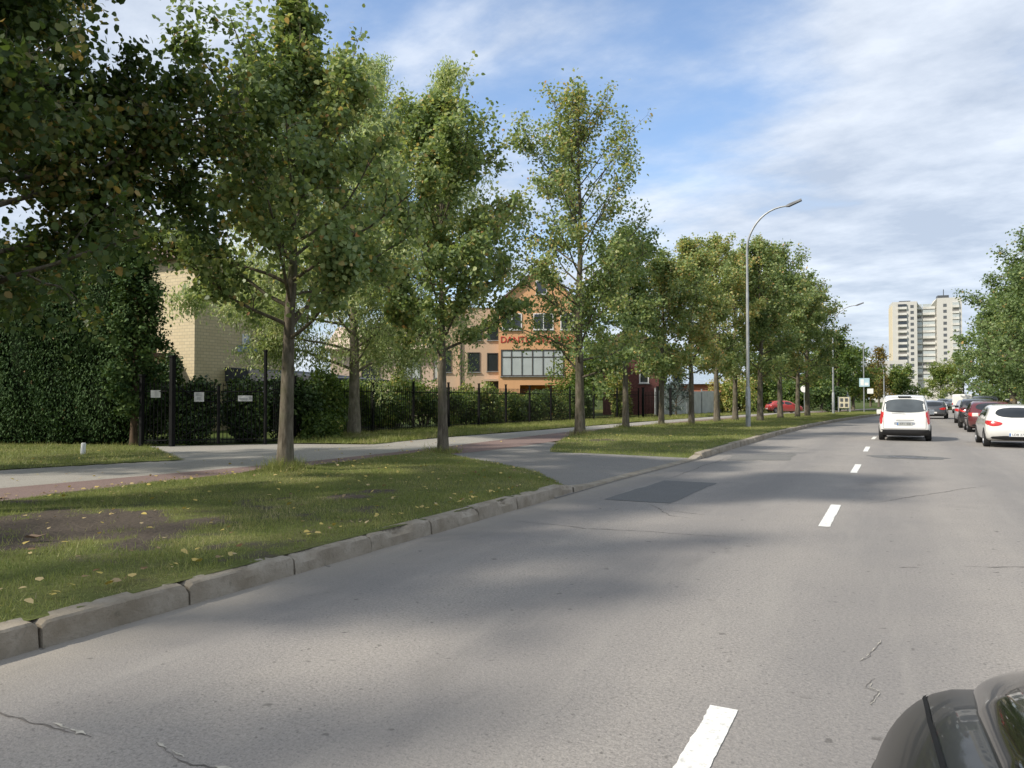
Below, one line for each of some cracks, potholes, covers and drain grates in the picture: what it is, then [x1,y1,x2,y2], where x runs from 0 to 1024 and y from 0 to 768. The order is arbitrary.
crack [0,712,231,768]
crack [861,640,881,705]
crack [530,504,738,538]
